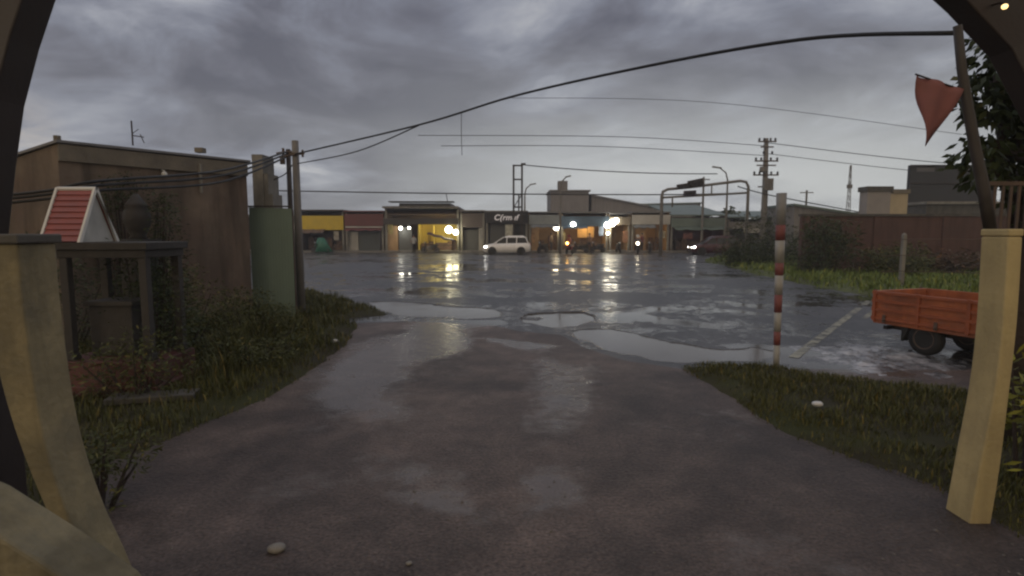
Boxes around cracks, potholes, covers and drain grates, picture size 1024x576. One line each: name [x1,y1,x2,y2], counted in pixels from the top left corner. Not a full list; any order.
pothole [518,311,597,328]
